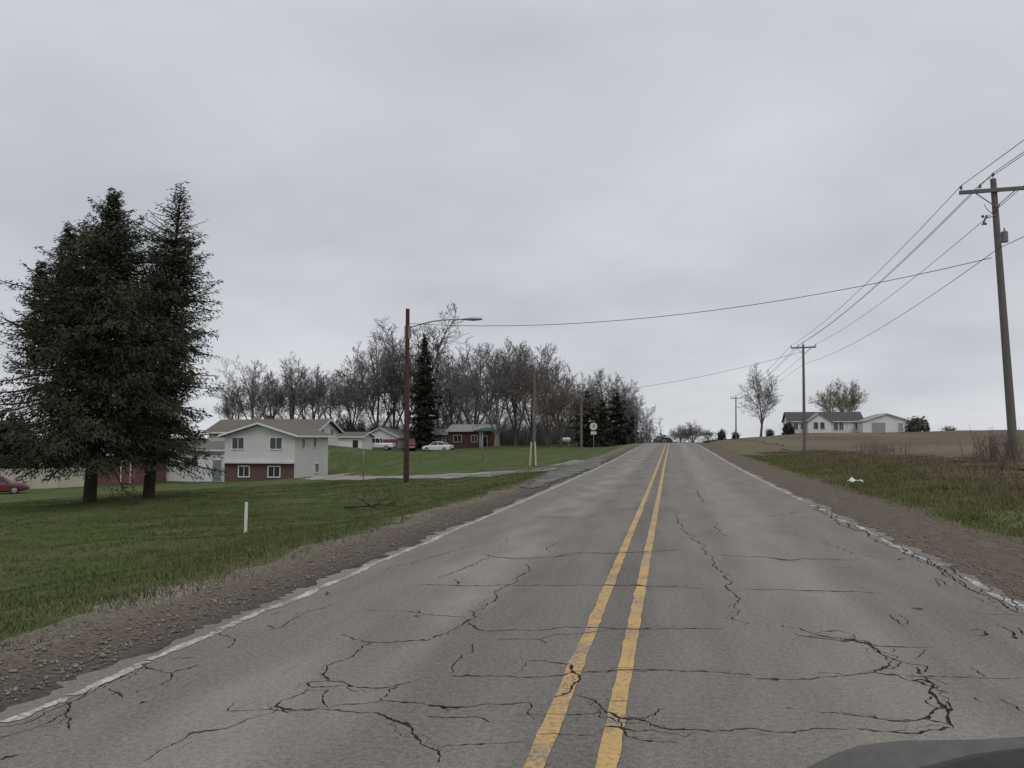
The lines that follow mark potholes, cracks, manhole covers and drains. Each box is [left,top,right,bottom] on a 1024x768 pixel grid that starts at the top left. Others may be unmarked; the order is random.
crack [144,501,1023,763]
